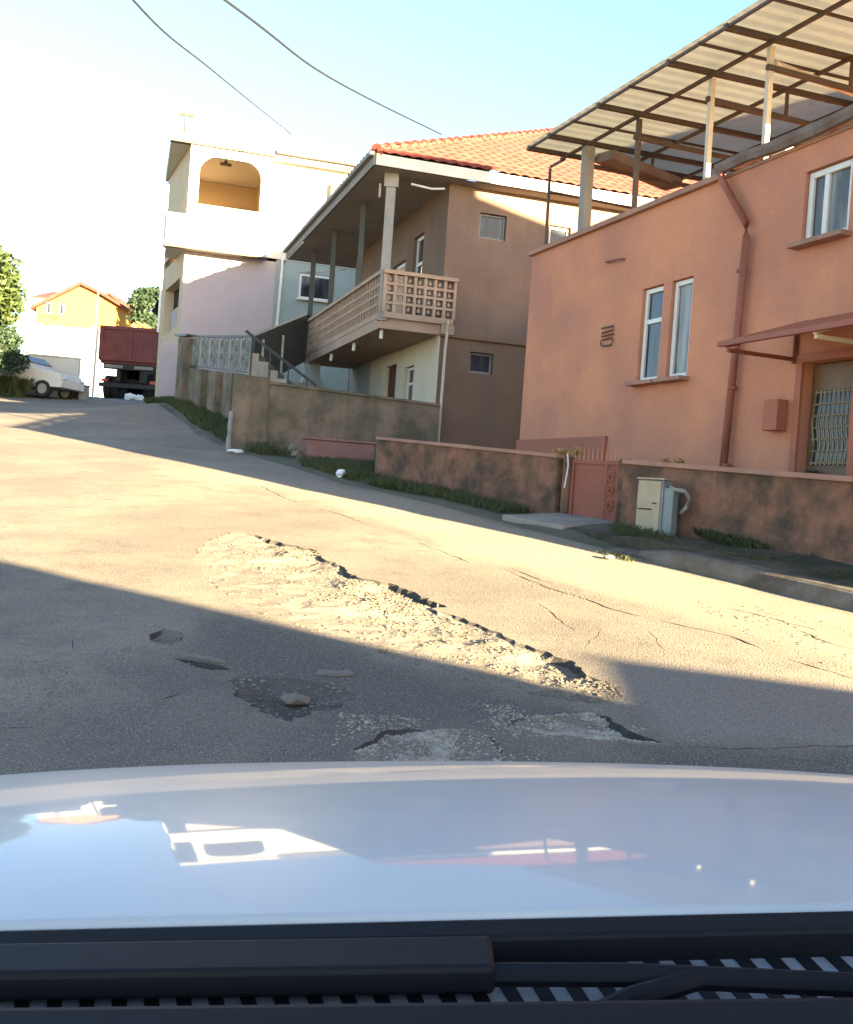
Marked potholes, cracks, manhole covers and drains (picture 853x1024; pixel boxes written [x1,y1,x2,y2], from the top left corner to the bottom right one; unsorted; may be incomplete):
pothole [353,728,503,761]
pothole [511,712,673,745]
crack [728,608,852,650]
pothole [228,676,358,723]
pothole [191,532,624,706]
crack [510,570,761,649]
pothole [174,658,230,670]
